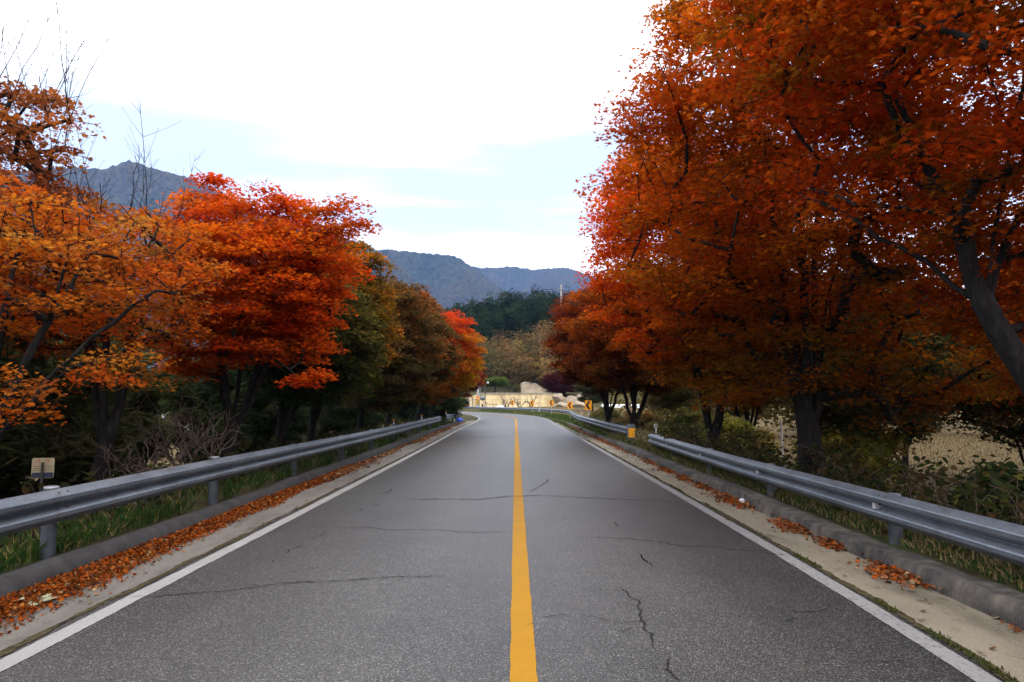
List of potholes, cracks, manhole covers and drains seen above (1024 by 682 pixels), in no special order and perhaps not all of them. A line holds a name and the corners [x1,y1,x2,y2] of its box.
crack [576,587,689,681]
crack [598,523,784,567]
crack [130,576,428,597]
crack [349,479,669,532]
